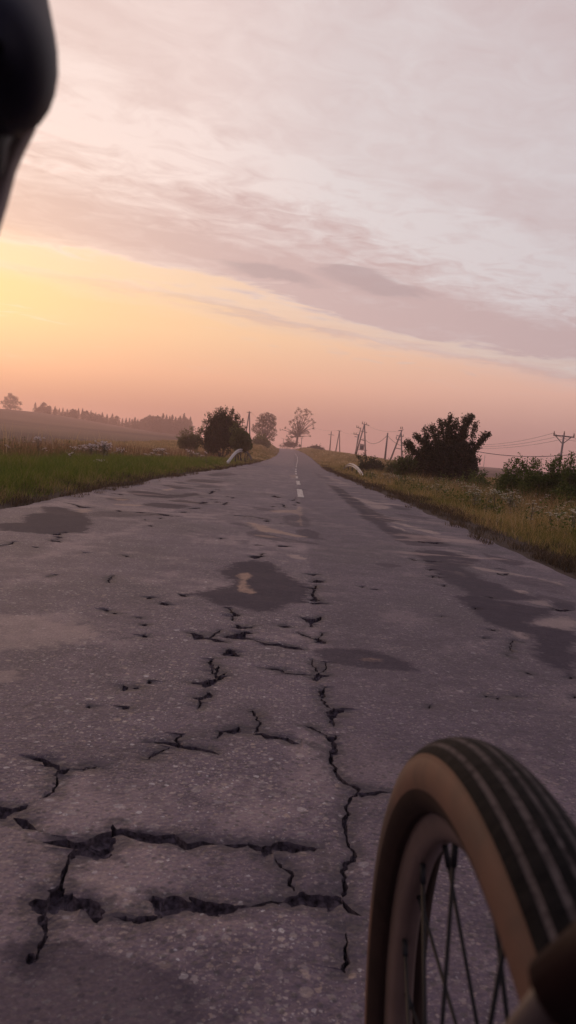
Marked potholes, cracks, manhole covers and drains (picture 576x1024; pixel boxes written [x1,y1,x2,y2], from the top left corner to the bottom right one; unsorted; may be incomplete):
crack [207,660,220,680]
crack [43,756,390,974]
crack [30,758,70,798]
crack [189,630,228,643]
crack [254,626,311,650]
crack [148,711,299,760]
